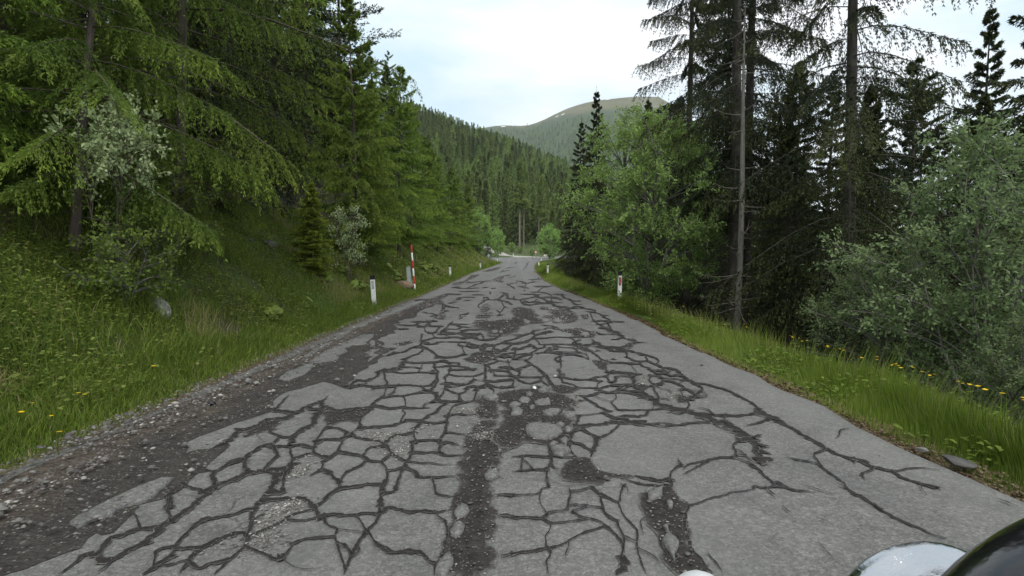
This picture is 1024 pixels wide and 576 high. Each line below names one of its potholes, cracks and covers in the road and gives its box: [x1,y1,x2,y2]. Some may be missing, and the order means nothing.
pothole [638,486,717,576]
pothole [472,303,545,337]
pothole [435,397,504,576]
crack [58,262,946,574]
pothole [544,309,578,324]
pothole [559,456,635,485]
pothole [552,328,596,338]
